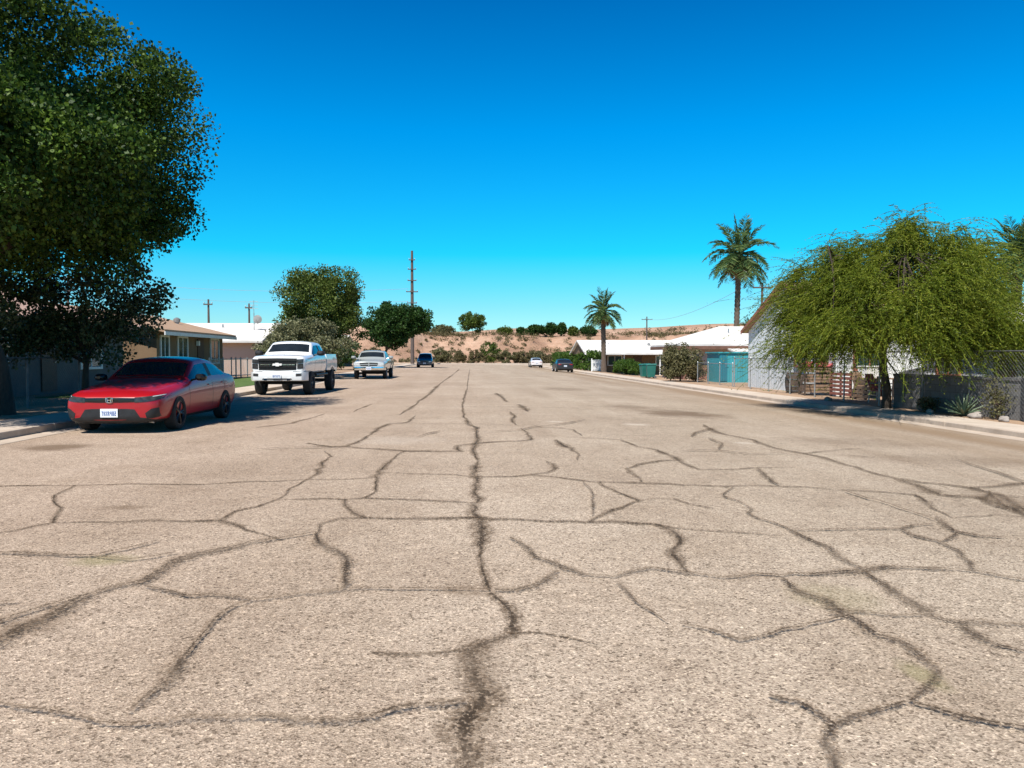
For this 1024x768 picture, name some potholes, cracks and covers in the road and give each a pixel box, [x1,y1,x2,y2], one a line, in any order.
crack [0,370,1024,768]
